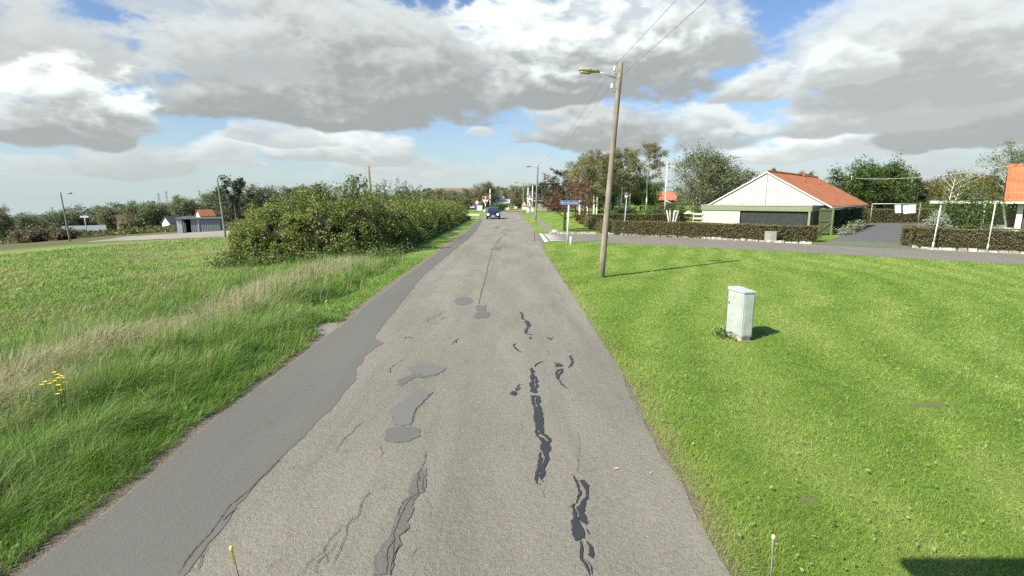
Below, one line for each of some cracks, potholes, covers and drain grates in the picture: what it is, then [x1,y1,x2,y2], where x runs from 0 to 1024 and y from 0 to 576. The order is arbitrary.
crack [385,451,432,575]
crack [303,492,370,573]
